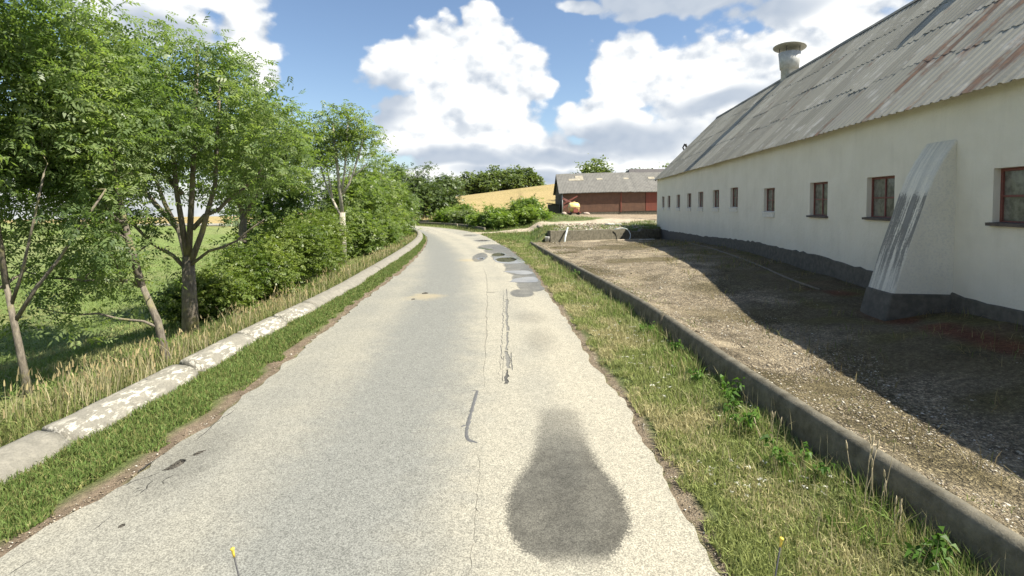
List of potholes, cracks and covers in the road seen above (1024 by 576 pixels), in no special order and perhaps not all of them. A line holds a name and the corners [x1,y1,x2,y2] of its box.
crack [118,453,175,493]
crack [498,289,513,384]
